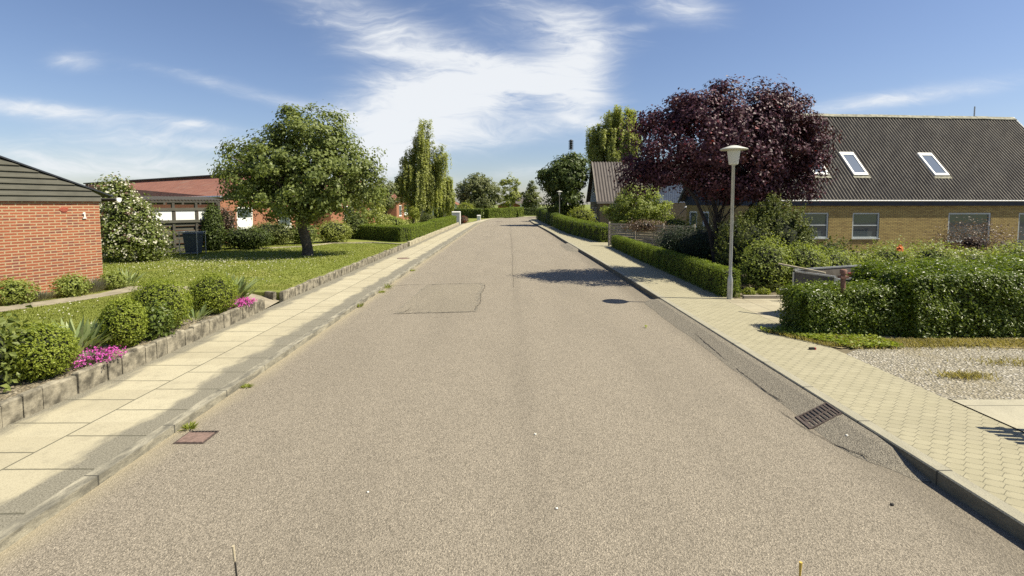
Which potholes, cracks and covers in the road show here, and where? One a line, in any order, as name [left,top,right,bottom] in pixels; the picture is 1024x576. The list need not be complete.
drain grate [795,402,842,430]
crack [782,412,881,464]
